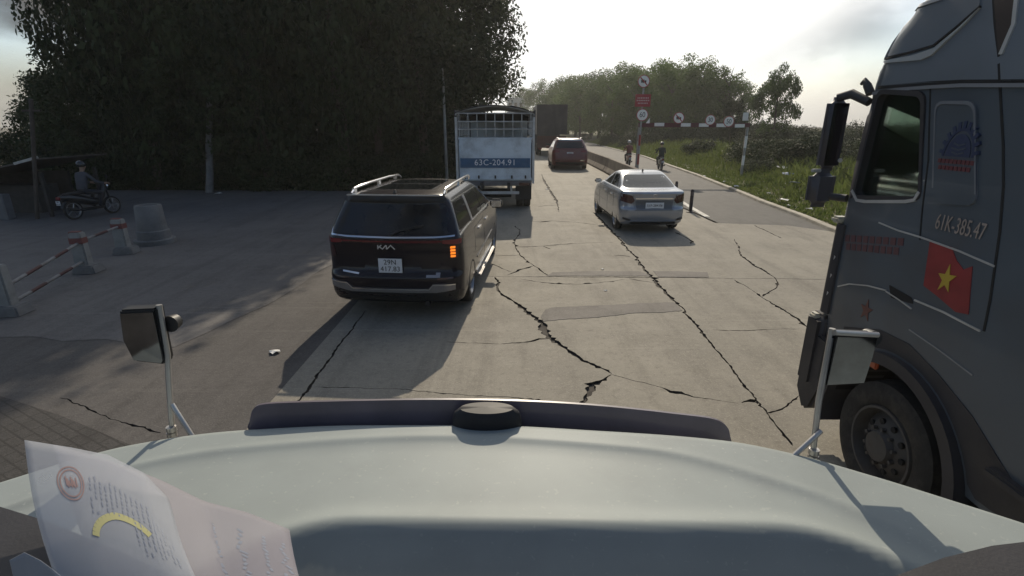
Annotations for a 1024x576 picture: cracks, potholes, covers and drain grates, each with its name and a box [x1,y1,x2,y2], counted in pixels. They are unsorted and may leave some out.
crack [722,225,807,331]
crack [768,396,798,413]
crack [62,398,161,433]
crack [323,178,734,403]
